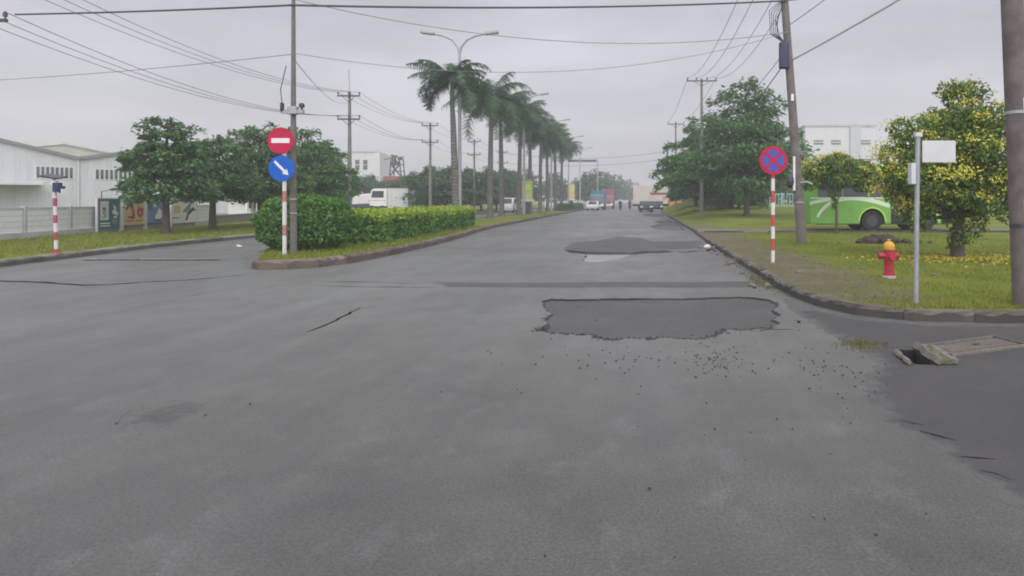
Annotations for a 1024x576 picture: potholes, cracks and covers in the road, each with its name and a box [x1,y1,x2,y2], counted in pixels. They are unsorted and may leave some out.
manhole cover [923,335,1024,357]
pothole [531,296,781,341]
crack [0,274,248,286]
crack [308,307,372,332]
crack [901,420,1012,480]
